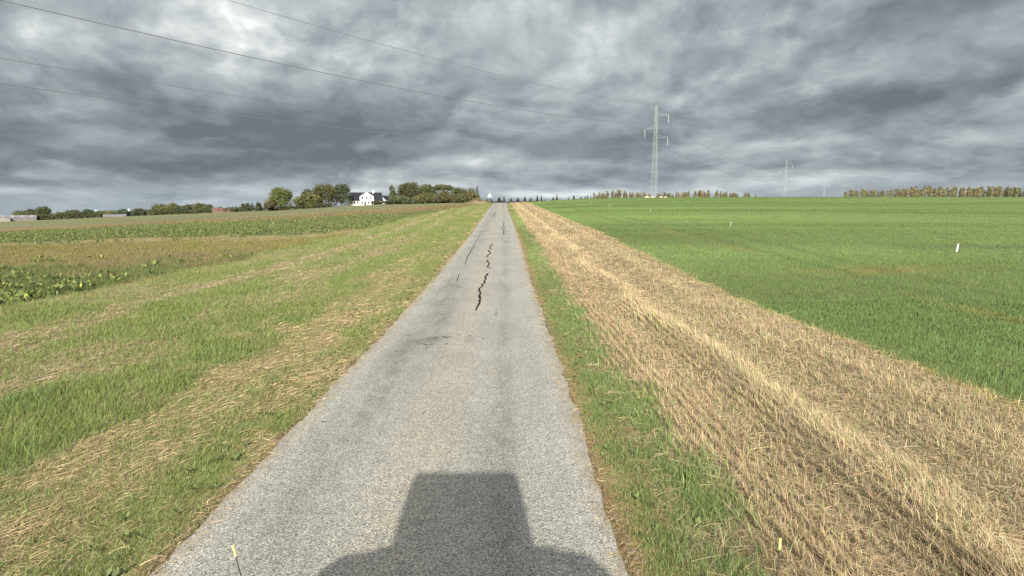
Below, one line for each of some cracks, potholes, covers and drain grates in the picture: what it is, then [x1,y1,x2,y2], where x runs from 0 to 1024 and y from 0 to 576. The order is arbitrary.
crack [450,213,504,311]
